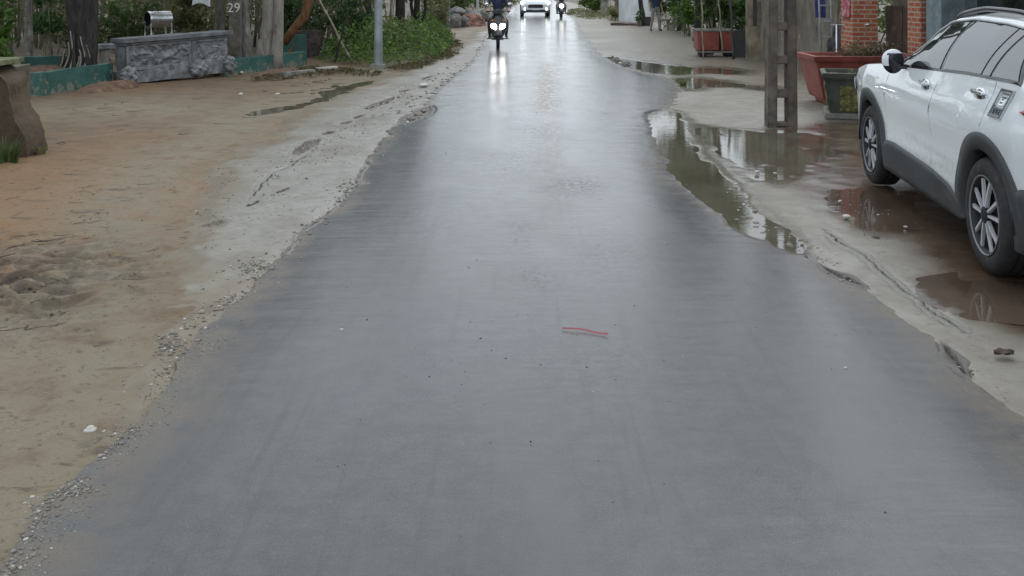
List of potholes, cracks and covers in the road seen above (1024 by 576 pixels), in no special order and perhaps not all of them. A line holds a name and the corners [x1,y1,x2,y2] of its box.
pothole [936,341,973,382]
pothole [817,263,870,290]
crack [240,151,372,258]
crack [818,228,973,333]
